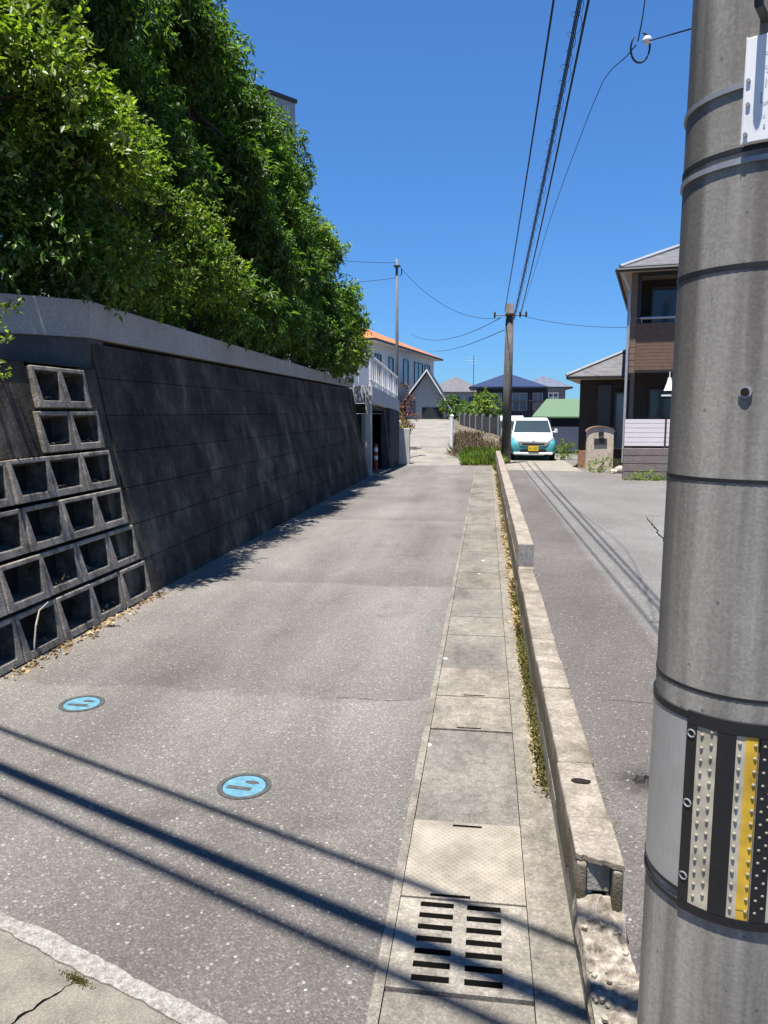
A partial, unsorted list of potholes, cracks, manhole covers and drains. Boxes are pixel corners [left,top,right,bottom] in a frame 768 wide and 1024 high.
crack [11,983,74,1024]
manhole cover [217,773,271,800]
drain grate [385,897,534,1006]
manhole cover [58,695,105,712]
